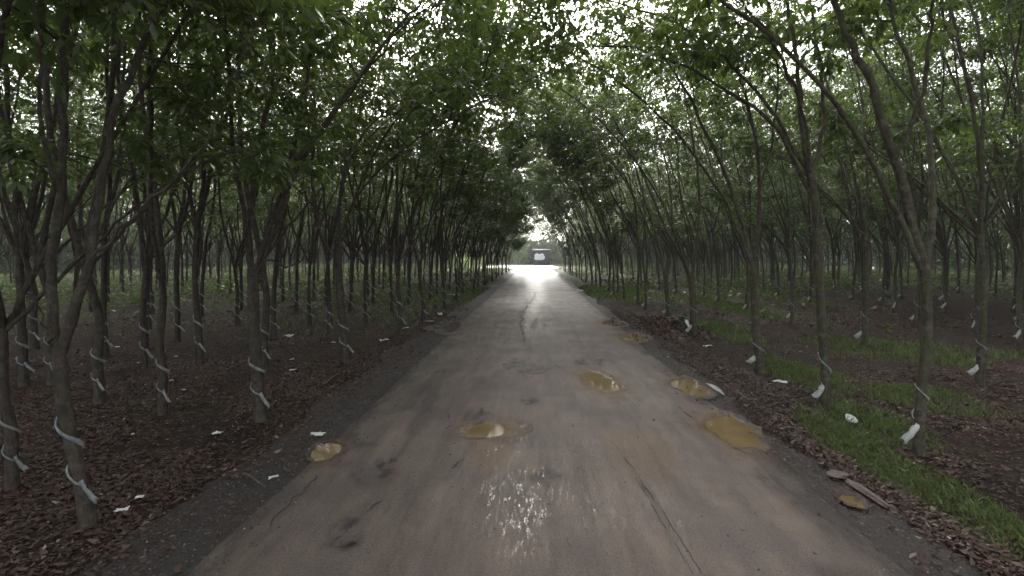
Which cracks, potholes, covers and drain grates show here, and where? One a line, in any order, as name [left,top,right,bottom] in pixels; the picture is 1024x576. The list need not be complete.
pothole [614,332,653,343]
pothole [594,319,630,327]
pothole [453,420,518,440]
crack [266,475,396,549]
